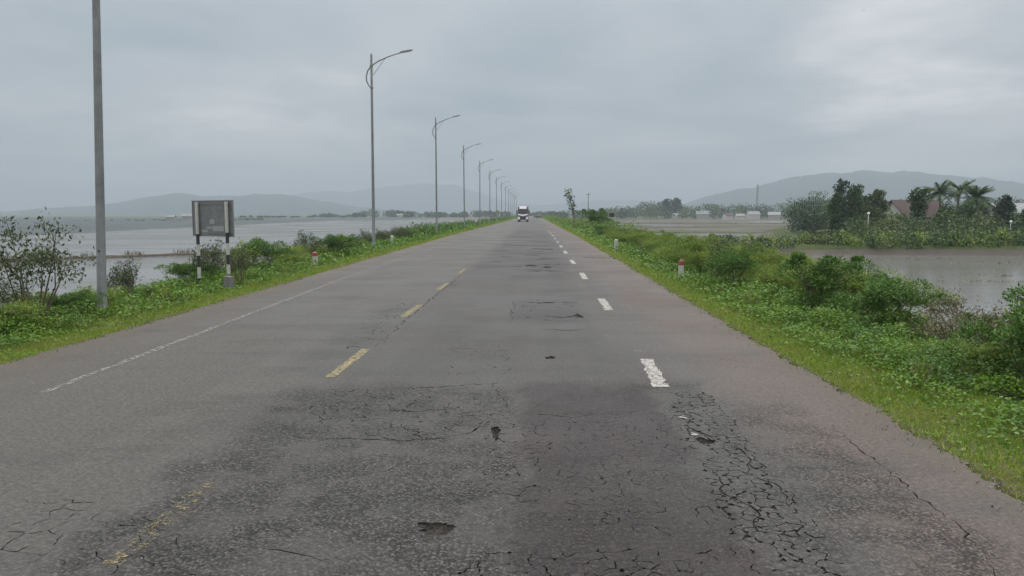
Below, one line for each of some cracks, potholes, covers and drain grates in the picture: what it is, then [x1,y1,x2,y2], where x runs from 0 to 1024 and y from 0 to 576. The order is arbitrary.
crack [831,424,996,576]
crack [347,303,407,349]
pothole [417,522,456,535]
crack [298,345,843,576]
crack [1,499,207,576]
